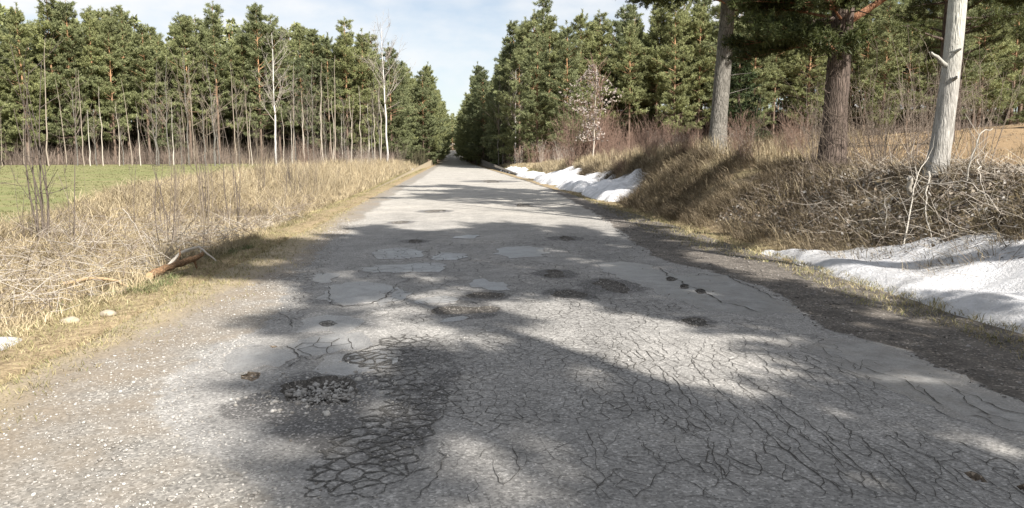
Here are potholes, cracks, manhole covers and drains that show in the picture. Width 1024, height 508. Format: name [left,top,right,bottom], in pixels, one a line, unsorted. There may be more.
pothole [544,269,566,278]
pothole [592,278,630,293]
crack [250,232,1024,500]
pothole [431,306,500,314]
pothole [551,290,588,298]
pothole [681,317,709,326]
